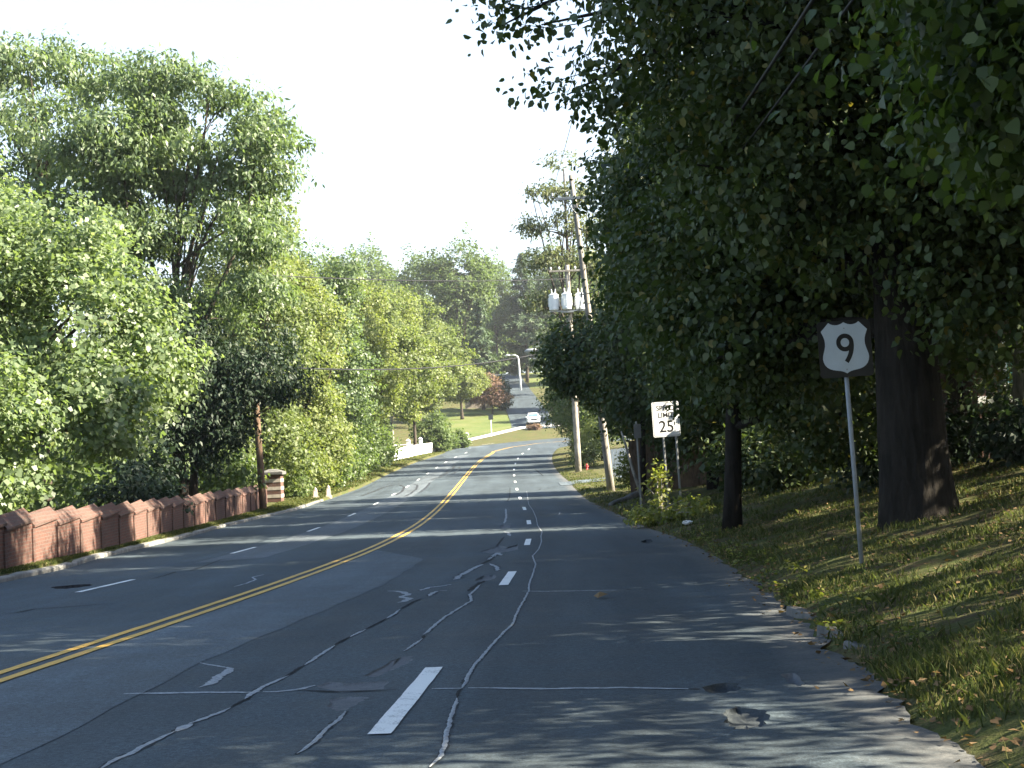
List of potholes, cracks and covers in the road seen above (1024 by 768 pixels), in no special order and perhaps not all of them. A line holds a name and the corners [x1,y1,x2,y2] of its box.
crack [98,469,698,768]
pothole [723,706,770,730]
pothole [702,683,741,693]
